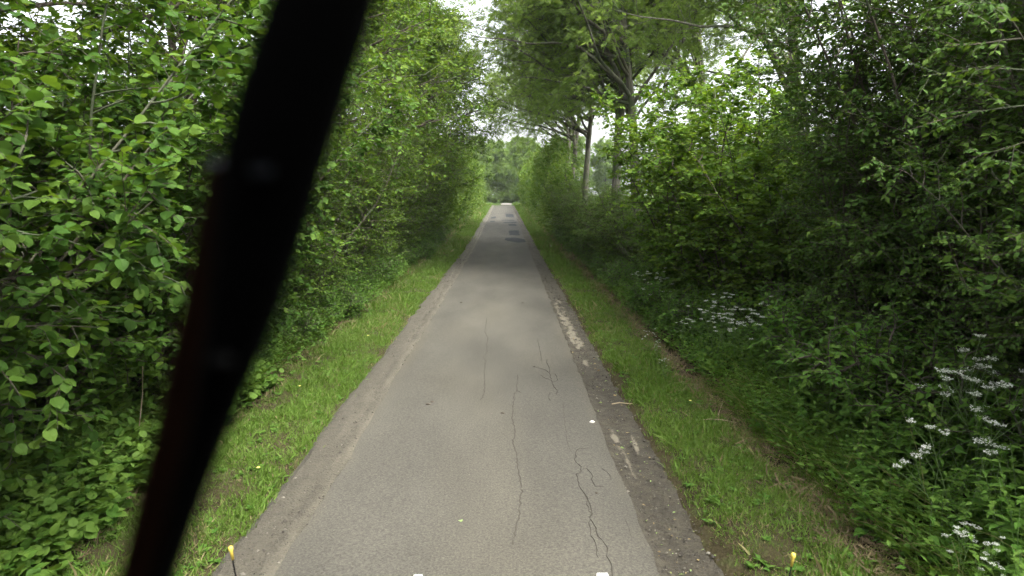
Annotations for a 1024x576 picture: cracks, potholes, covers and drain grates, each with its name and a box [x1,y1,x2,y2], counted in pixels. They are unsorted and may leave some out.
crack [511,343,613,576]
